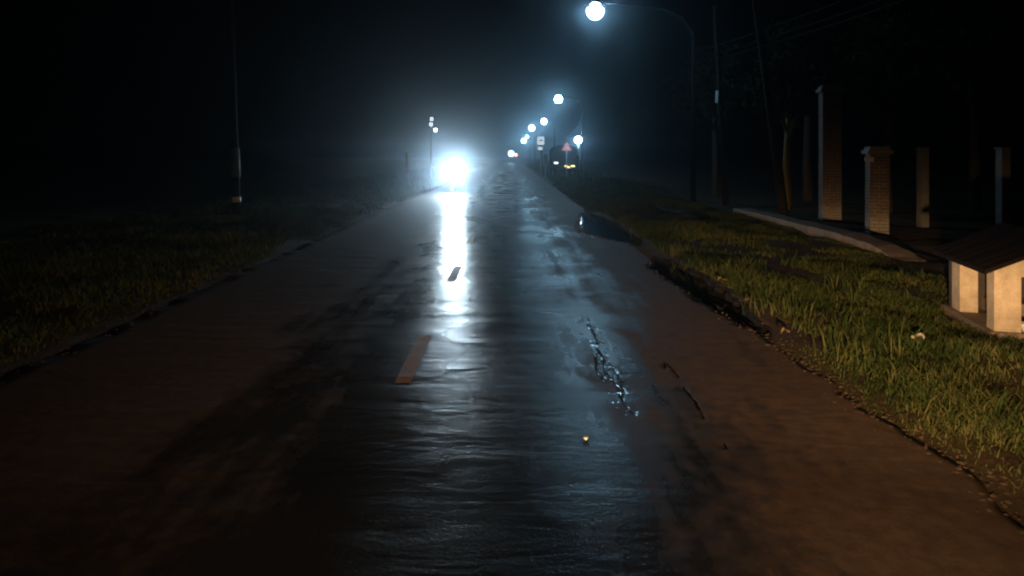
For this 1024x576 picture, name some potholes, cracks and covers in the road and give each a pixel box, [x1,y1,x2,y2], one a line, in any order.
crack [663,362,731,456]
crack [580,318,638,416]
